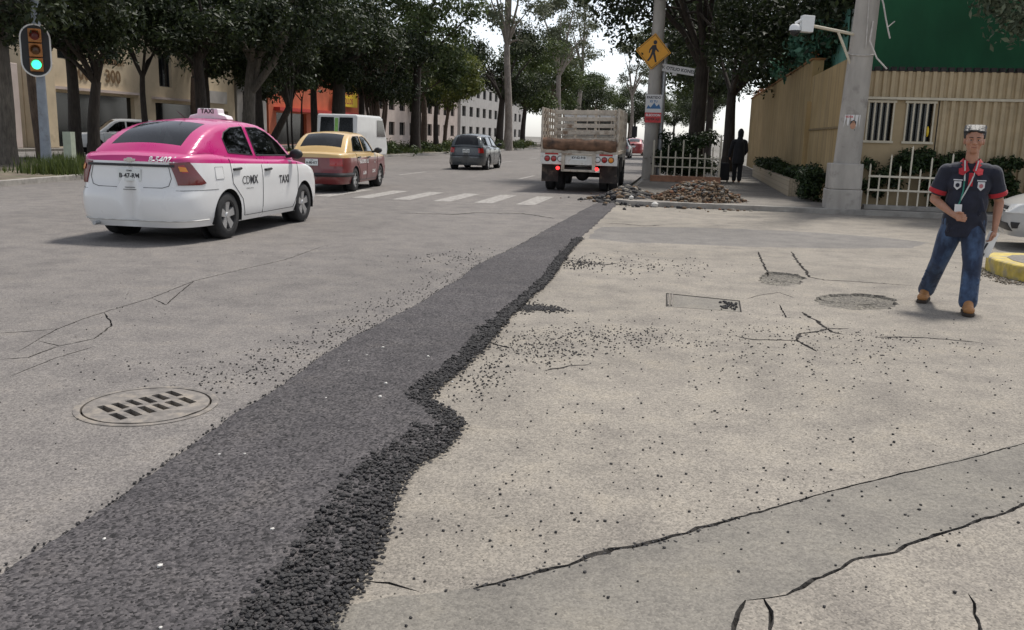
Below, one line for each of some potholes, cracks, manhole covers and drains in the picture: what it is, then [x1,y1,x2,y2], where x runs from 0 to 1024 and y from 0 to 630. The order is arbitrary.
crack [365,580,419,592]
crack [737,252,911,351]
pothole [814,293,900,310]
crack [474,443,1024,630]
crack [0,245,326,377]
manhole cover [666,293,742,312]
pothole [758,272,807,286]
